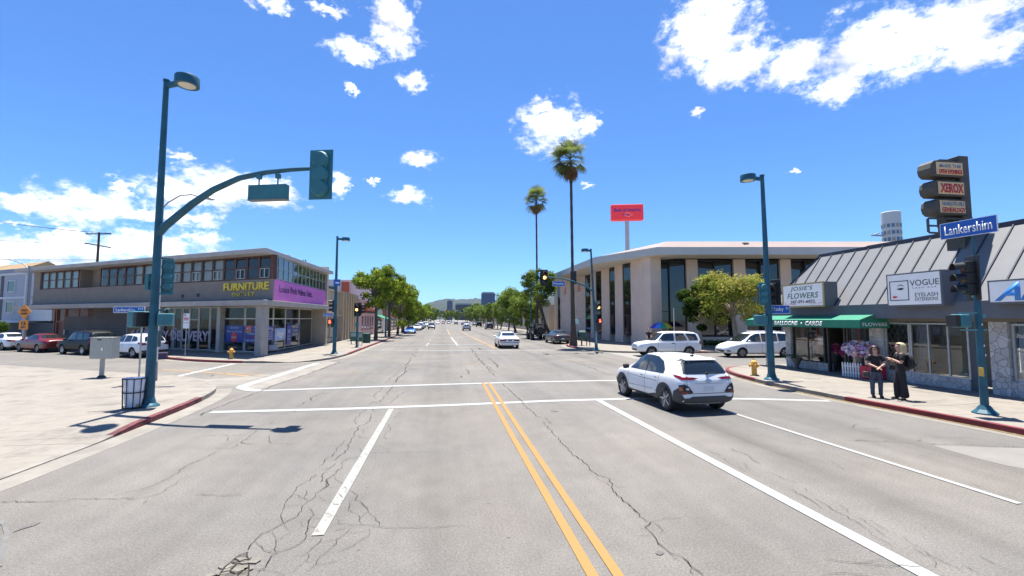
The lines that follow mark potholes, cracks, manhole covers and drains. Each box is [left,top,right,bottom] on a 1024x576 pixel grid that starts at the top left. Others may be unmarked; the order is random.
crack [3,412,288,502]
pothole [205,552,261,576]
crack [248,355,462,573]
